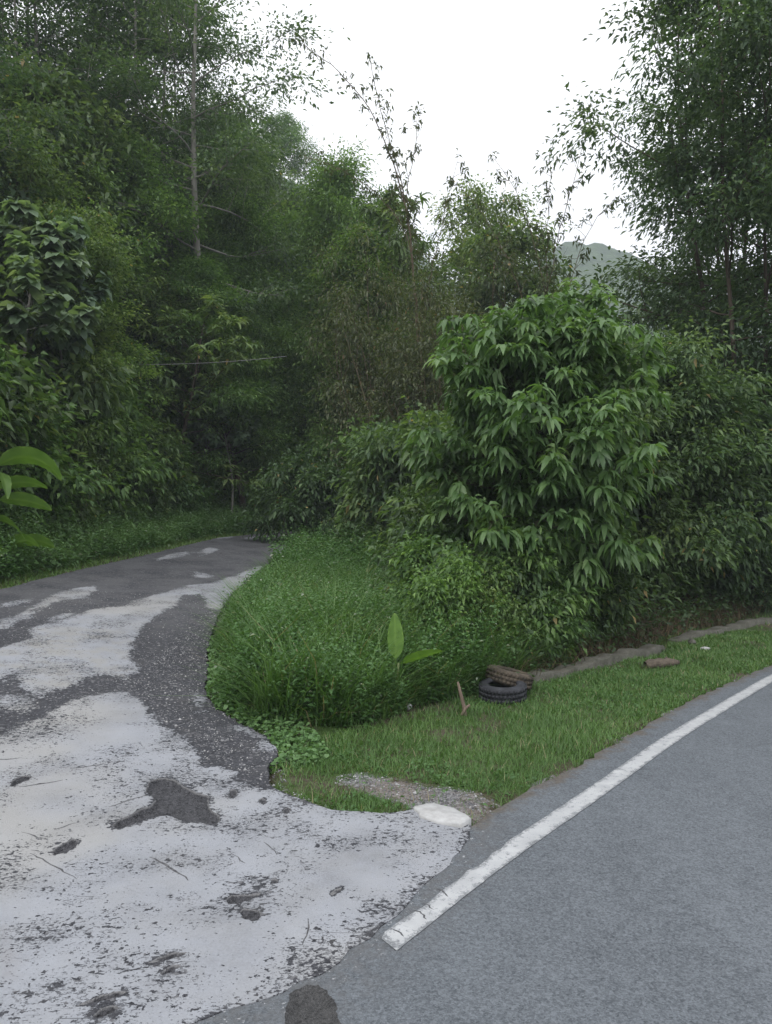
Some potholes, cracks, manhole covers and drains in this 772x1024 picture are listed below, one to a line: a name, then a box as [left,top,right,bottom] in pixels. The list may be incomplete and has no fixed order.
pothole [11,776,32,786]
crack [23,823,77,879]
pothole [240,908,261,921]
pothole [52,839,78,855]
pothole [226,893,261,904]
pothole [113,778,220,828]
crack [150,857,188,880]
pothole [285,985,341,1024]
